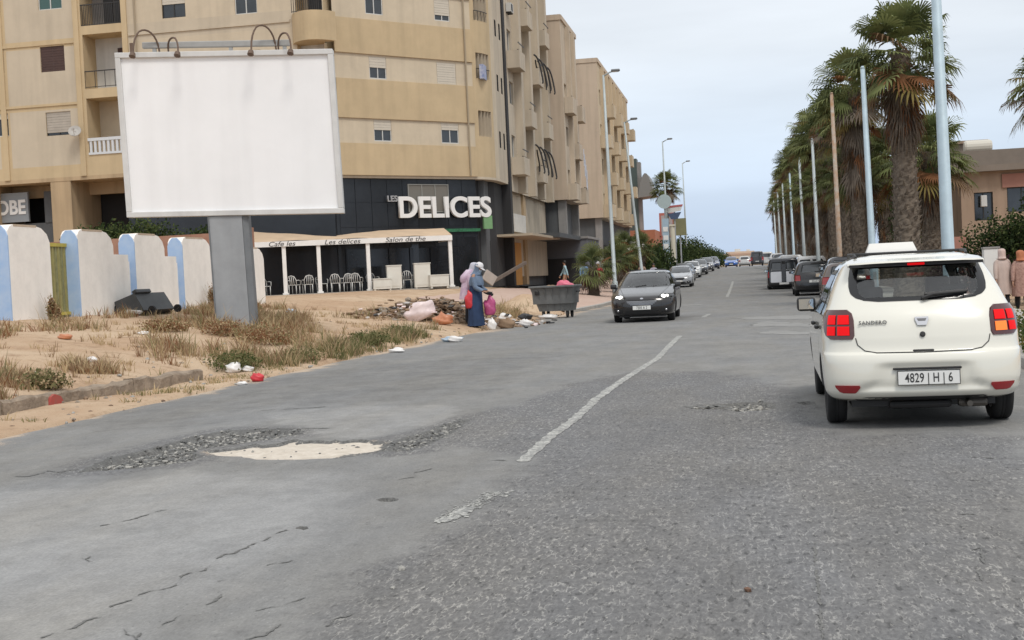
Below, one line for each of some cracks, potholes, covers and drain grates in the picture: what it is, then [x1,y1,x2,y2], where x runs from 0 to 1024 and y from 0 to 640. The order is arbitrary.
pothole [691,399,777,412]
crack [247,597,305,639]
crack [40,529,287,638]
crack [971,547,985,582]
pothole [78,428,305,473]
